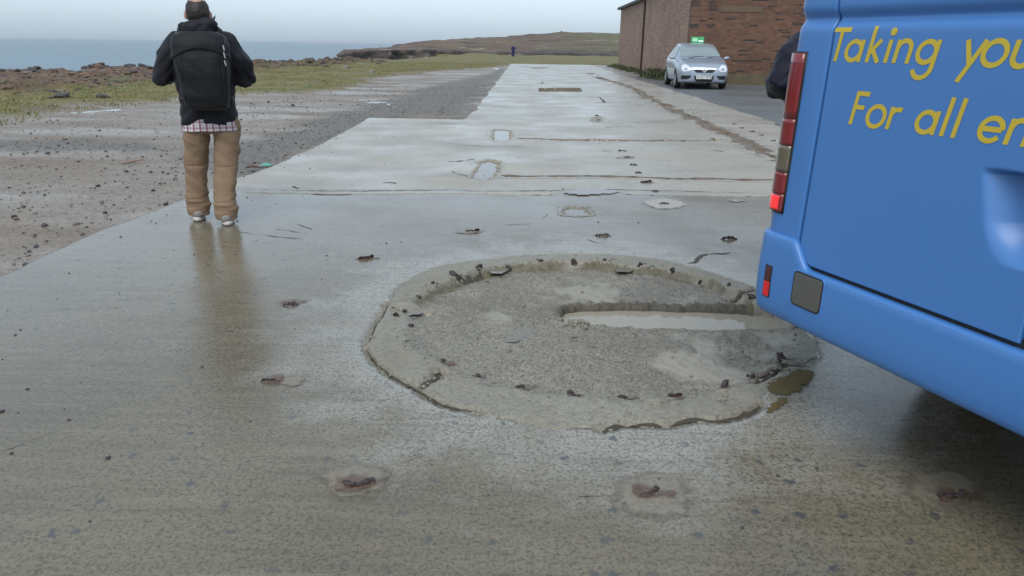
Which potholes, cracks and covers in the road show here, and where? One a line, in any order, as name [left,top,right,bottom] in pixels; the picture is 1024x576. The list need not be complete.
pothole [467,159,506,181]
pothole [487,129,519,141]
pothole [558,206,596,217]
pothole [557,311,784,331]
